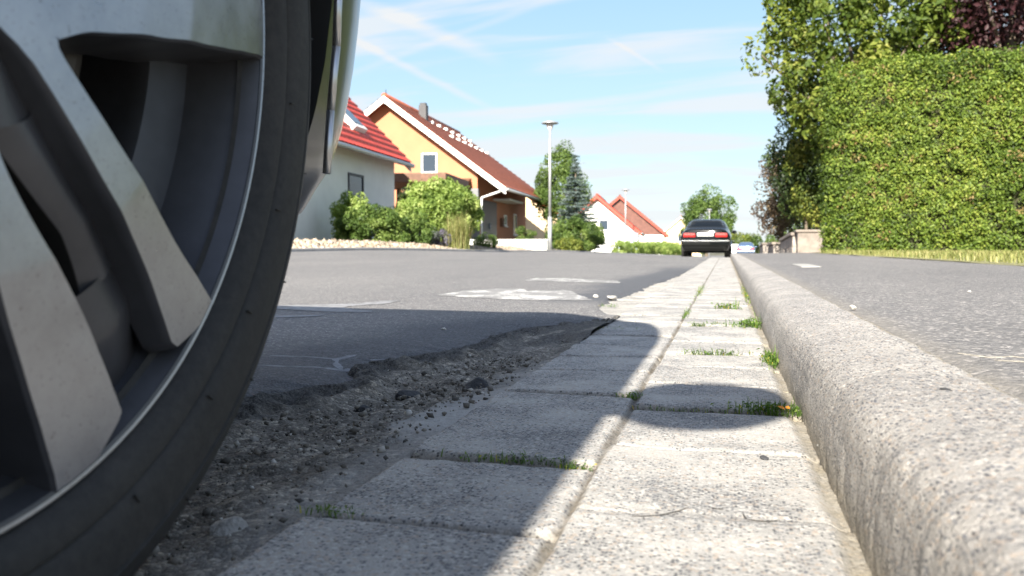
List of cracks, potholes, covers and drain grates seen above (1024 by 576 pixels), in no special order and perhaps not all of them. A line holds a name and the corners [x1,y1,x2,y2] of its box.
crack [262,355,385,372]
pothole [134,315,620,576]
crack [632,507,780,522]
